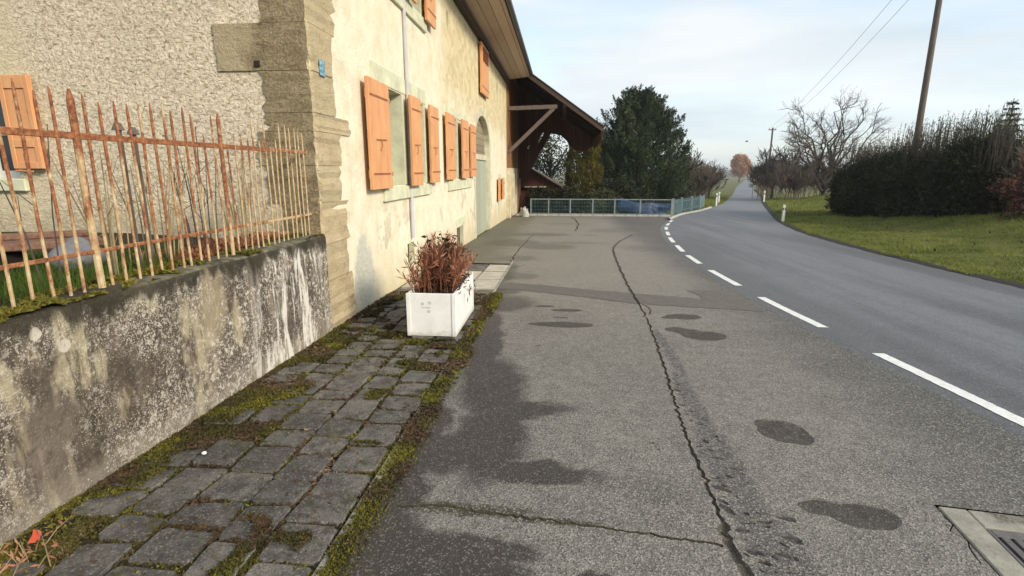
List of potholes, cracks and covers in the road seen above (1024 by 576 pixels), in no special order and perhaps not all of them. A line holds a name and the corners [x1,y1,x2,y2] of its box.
crack [395,235,804,576]
